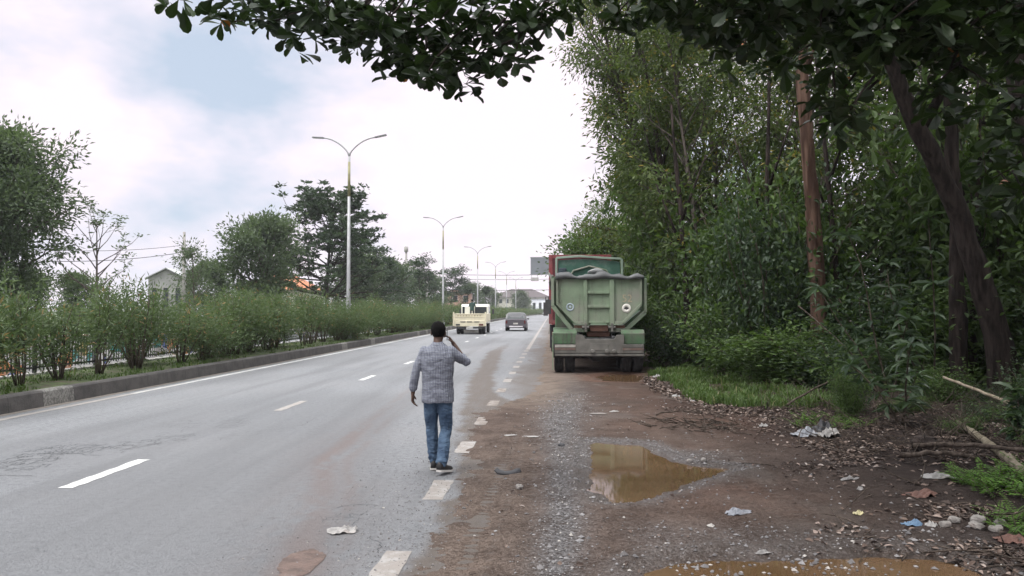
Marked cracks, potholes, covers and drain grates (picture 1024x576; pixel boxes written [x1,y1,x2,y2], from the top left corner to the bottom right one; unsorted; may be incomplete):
pothole [577,440,740,503]
crack [322,504,383,552]
crack [0,418,256,476]
pothole [629,546,1006,576]
